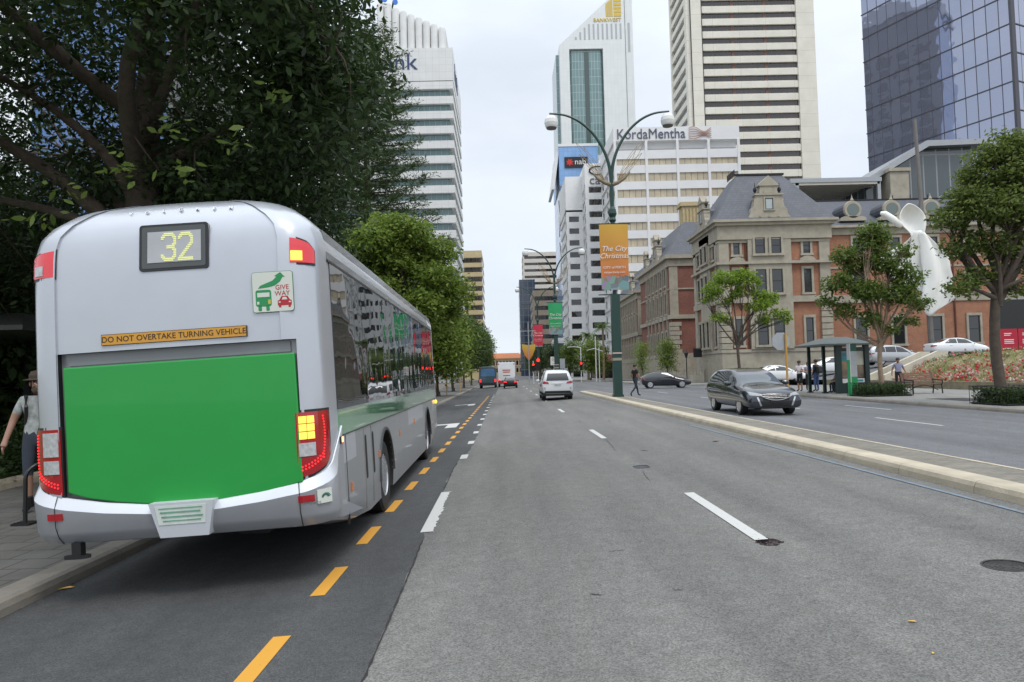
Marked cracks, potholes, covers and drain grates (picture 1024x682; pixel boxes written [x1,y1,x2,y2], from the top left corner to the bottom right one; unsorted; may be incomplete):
manhole cover [980,559,1024,572]
pothole [755,537,784,546]
